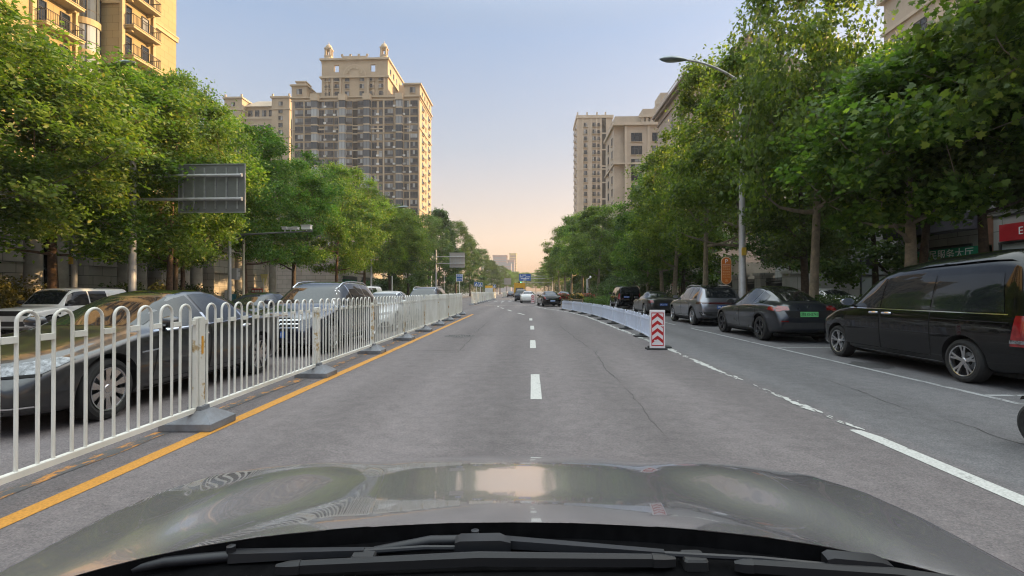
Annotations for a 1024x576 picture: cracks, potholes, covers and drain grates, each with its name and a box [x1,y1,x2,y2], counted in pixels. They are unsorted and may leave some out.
crack [460,324,663,433]
